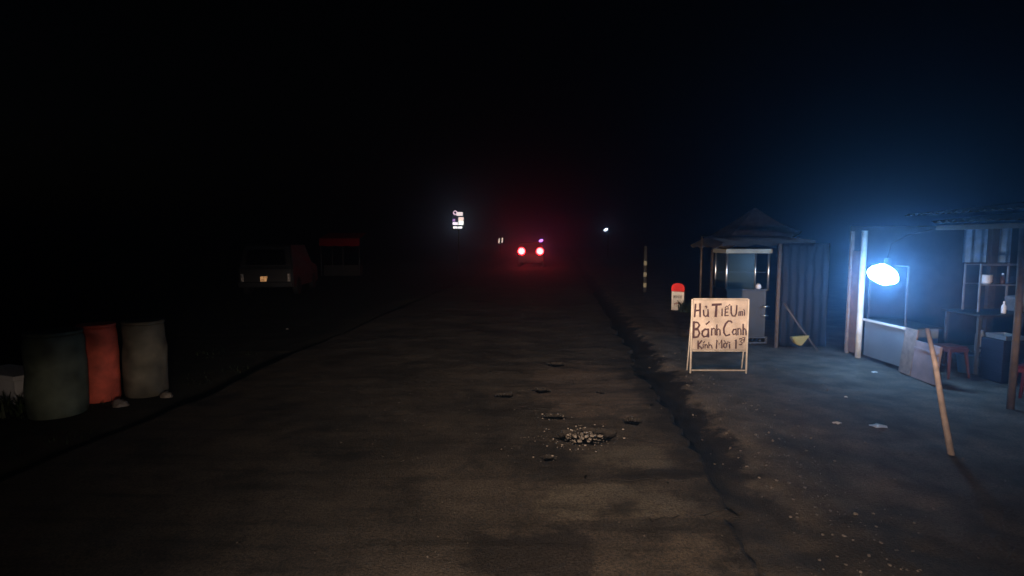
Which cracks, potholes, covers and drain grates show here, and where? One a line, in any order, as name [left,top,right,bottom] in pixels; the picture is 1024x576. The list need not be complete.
pothole [523,385,559,396]
pothole [538,361,571,369]
pothole [612,414,652,429]
pothole [486,390,521,400]
pothole [533,411,576,423]
pothole [525,424,633,452]
pothole [528,451,569,466]
